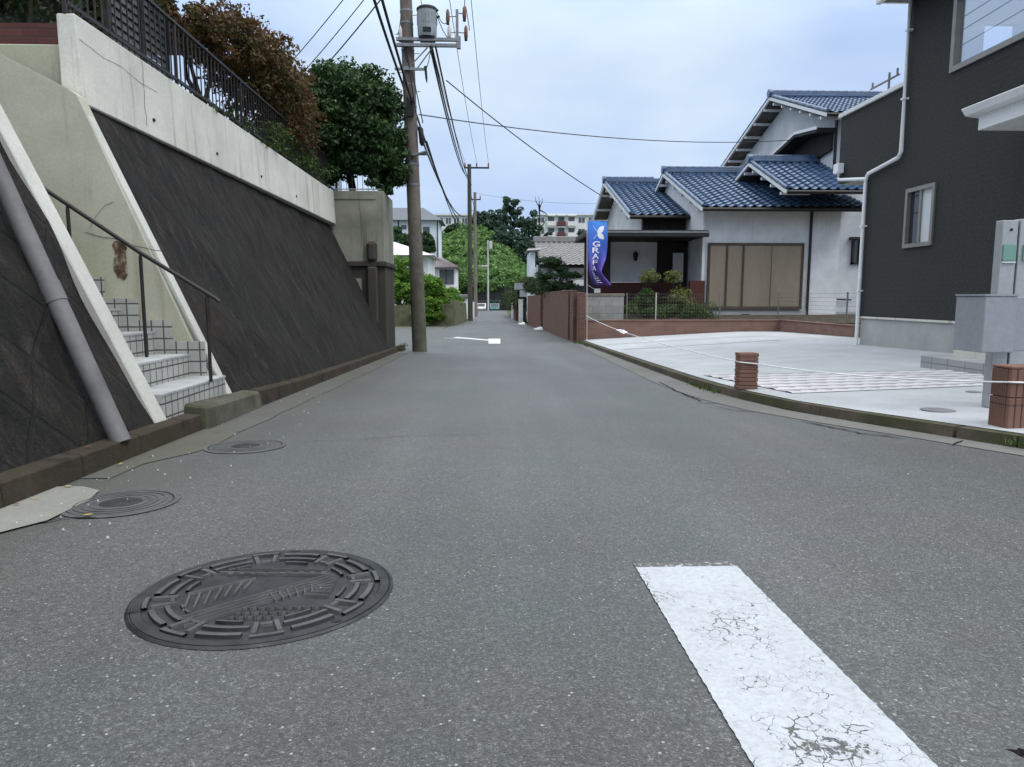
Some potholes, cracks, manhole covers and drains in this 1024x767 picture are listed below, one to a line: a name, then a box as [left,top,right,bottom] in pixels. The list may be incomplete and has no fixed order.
manhole cover [203,439,286,453]
manhole cover [124,550,393,650]
manhole cover [61,490,180,518]
